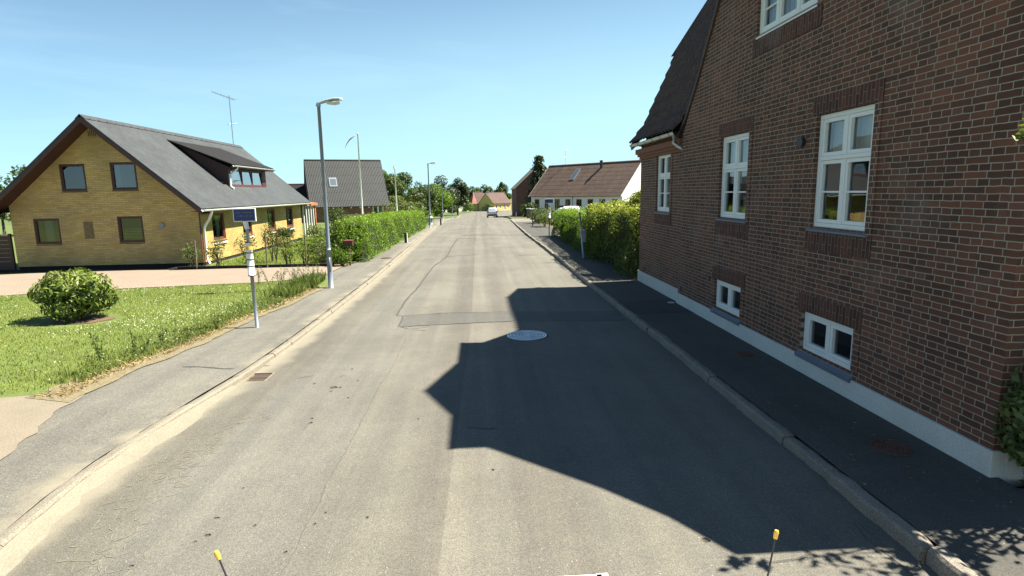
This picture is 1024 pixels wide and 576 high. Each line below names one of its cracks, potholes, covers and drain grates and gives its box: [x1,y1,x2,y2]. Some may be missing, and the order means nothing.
manhole cover [507,330,547,341]
drain grate [243,372,275,382]
manhole cover [870,440,912,456]
